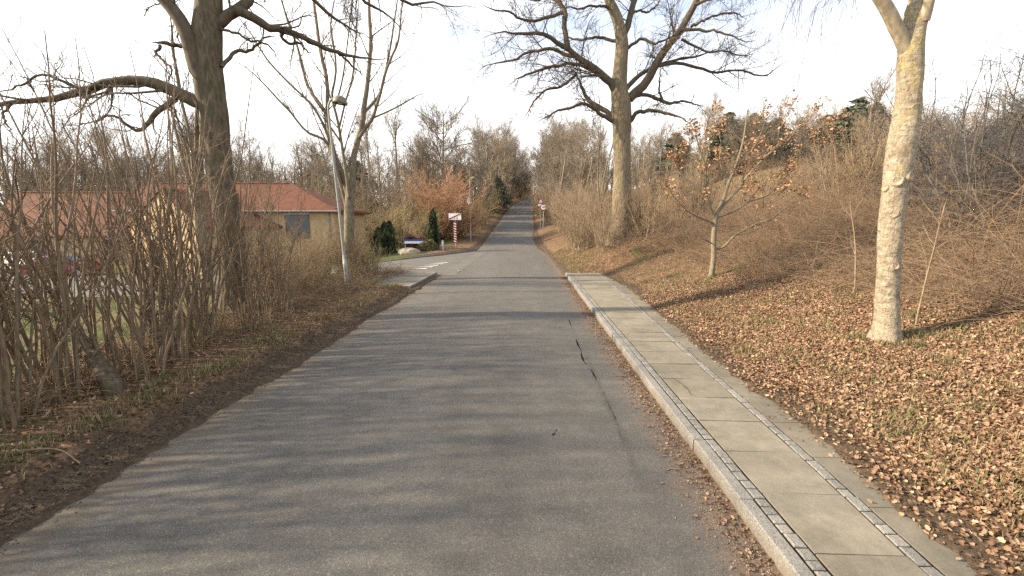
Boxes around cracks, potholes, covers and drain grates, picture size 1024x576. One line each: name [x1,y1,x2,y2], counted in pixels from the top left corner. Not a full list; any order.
crack [569,321,616,418]
